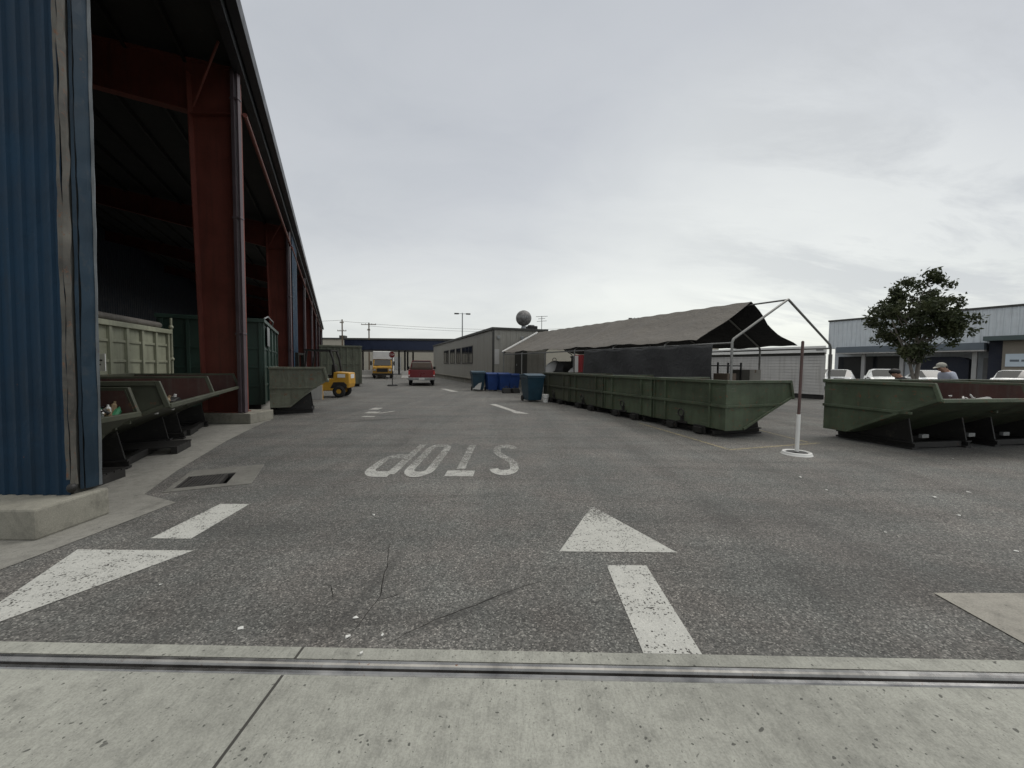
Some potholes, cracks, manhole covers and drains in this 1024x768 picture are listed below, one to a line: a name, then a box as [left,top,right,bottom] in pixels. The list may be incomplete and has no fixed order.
drain grate [162,464,264,493]
crack [352,541,398,633]
crack [388,580,543,644]
